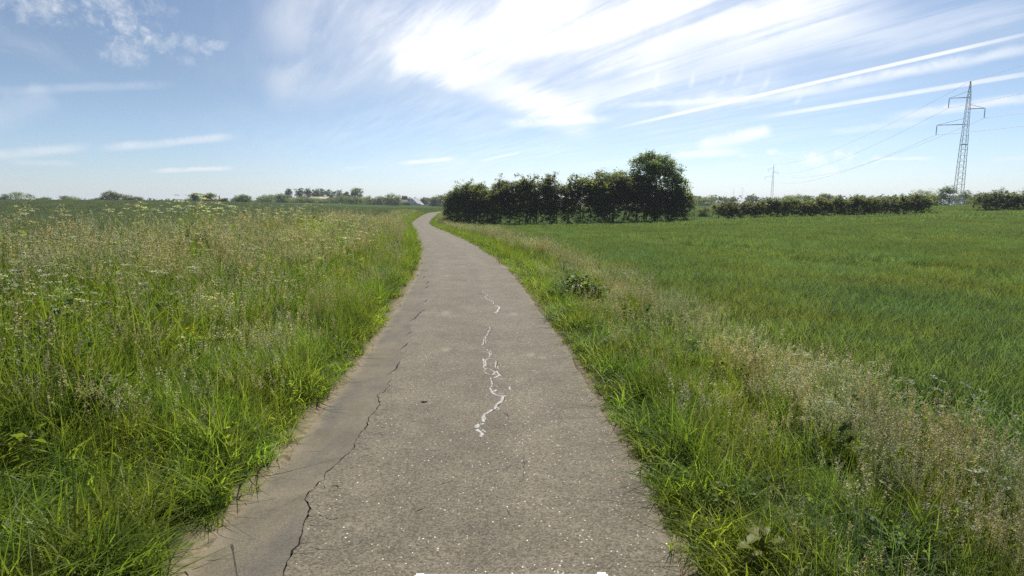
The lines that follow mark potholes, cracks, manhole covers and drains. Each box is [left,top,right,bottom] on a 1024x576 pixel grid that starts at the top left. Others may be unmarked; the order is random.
crack [283,385,401,576]
